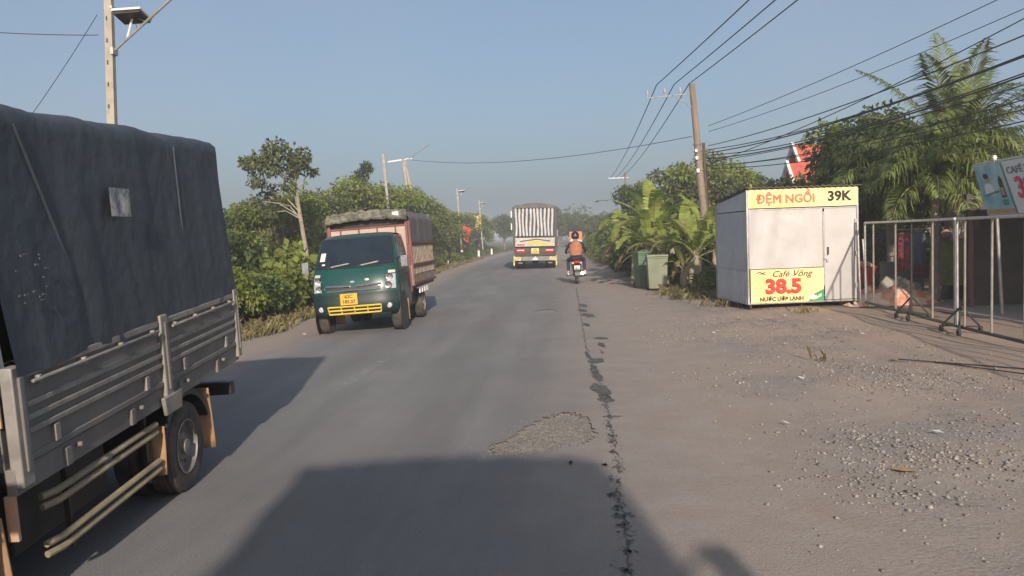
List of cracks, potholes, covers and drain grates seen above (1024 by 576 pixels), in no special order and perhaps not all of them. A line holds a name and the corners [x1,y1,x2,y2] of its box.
crack [575,288,638,576]
pothole [453,407,609,461]
